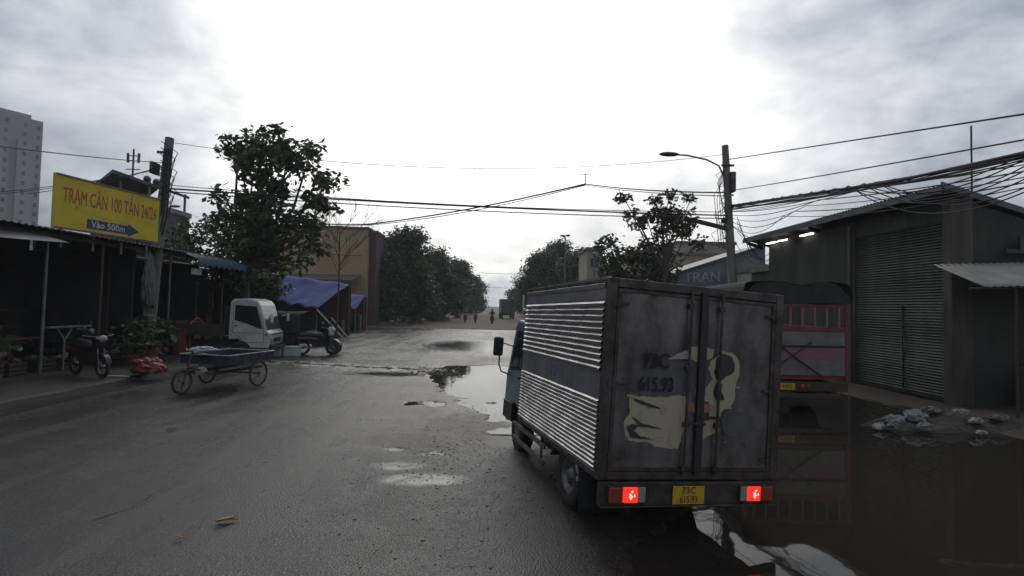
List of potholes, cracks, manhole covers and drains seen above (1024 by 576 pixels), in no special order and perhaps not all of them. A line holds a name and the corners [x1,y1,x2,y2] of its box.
crack [92,469,213,521]
pothole [424,364,537,435]
